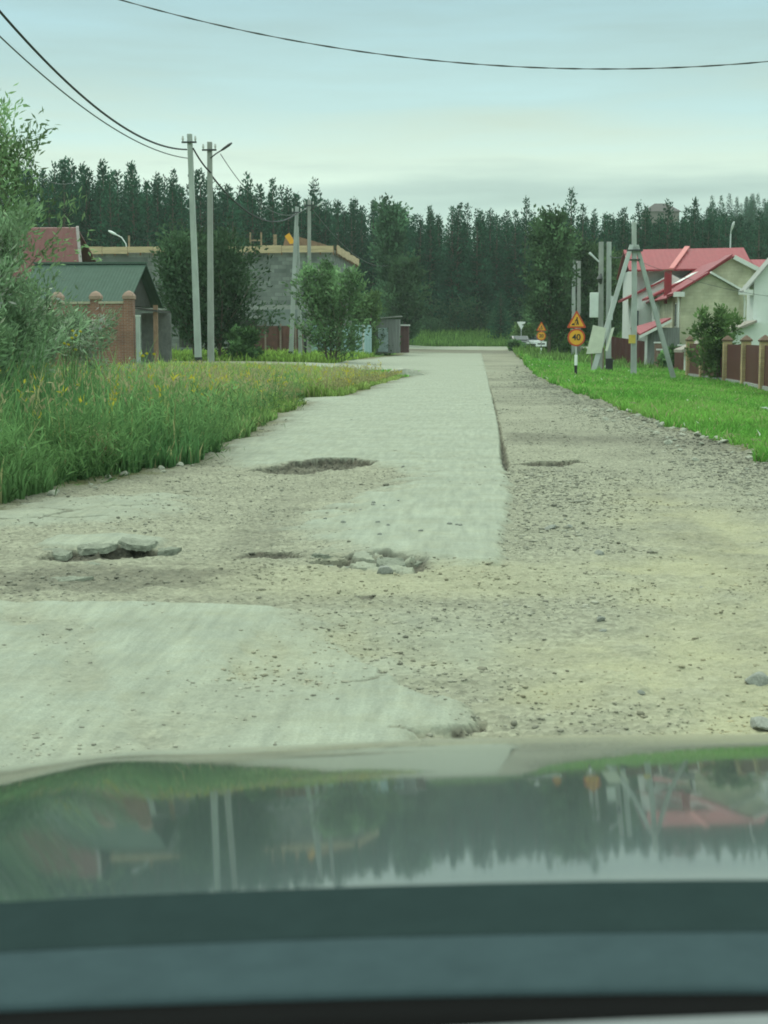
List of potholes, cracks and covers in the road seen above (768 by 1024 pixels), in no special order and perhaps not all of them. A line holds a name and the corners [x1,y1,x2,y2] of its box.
pothole [231,551,305,562]
pothole [32,544,183,563]
pothole [245,457,386,475]
